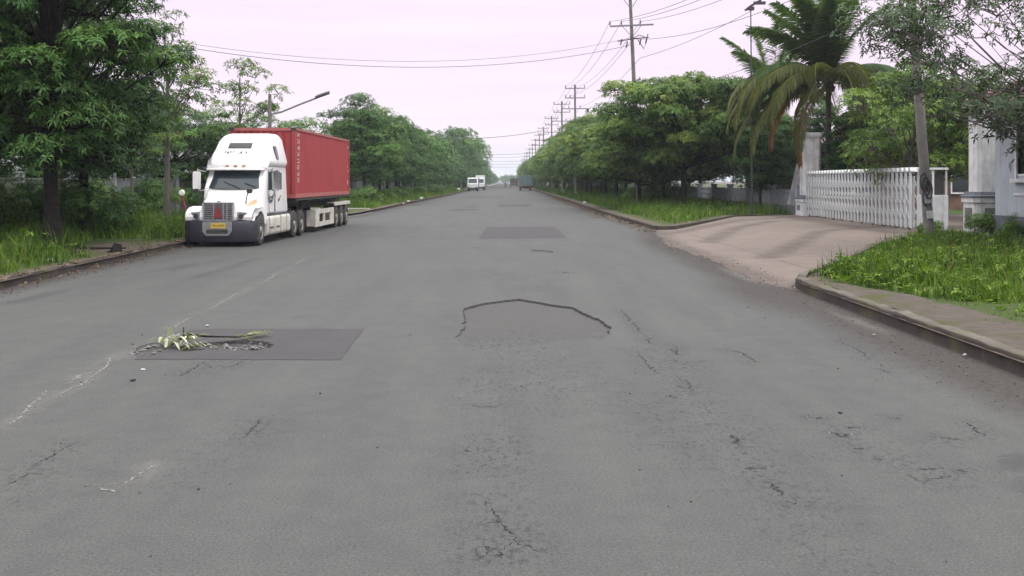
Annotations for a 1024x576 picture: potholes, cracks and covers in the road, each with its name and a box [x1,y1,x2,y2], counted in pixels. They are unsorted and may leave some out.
crack [910,468,968,487]
crack [8,445,73,485]
crack [479,501,537,559]
crack [809,417,882,460]
crack [729,434,745,446]
crack [745,466,797,505]
pothole [180,341,273,351]
crack [10,258,304,424]
crack [623,311,694,412]
crack [938,423,985,443]
